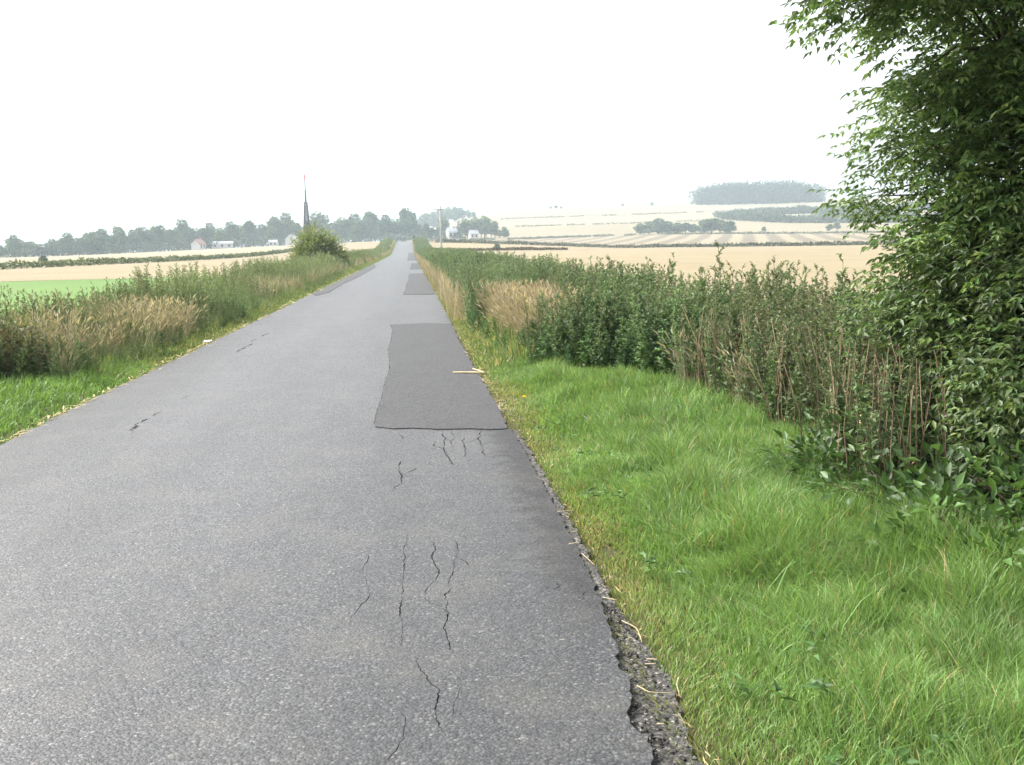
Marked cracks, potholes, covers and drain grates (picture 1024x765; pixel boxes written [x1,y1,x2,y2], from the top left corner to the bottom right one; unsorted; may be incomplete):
crack [422,431,485,465]
crack [385,534,469,762]
